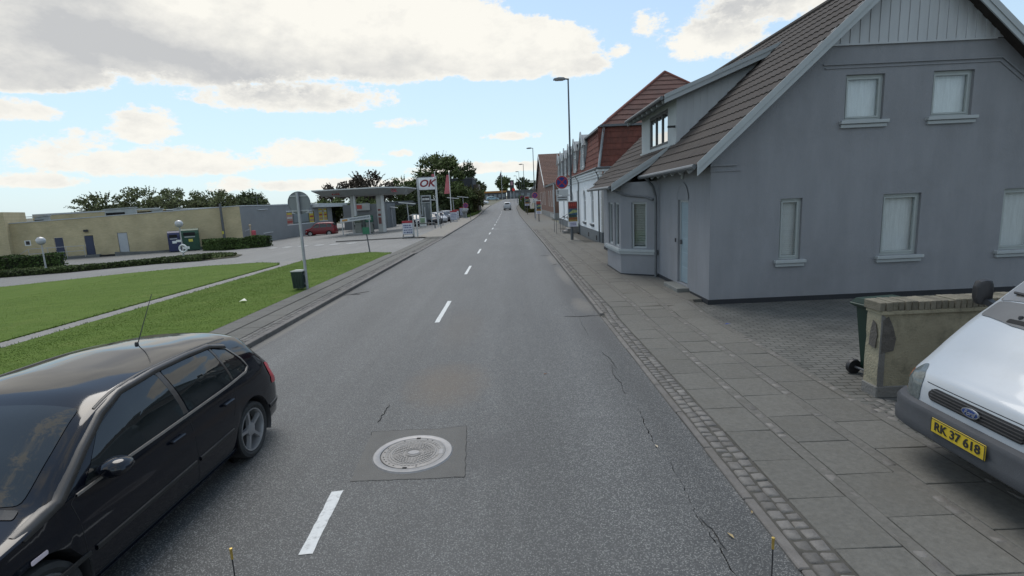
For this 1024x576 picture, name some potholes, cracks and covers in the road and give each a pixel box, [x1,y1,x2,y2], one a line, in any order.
manhole cover [372,435,453,474]
